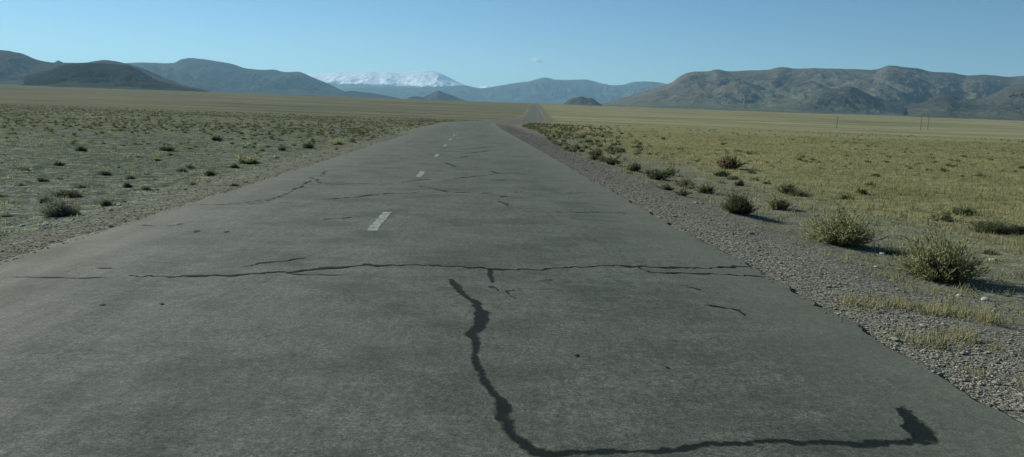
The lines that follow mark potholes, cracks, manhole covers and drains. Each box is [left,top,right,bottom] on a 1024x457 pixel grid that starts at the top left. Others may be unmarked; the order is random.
crack [181,146,508,206]
crack [129,257,937,457]
